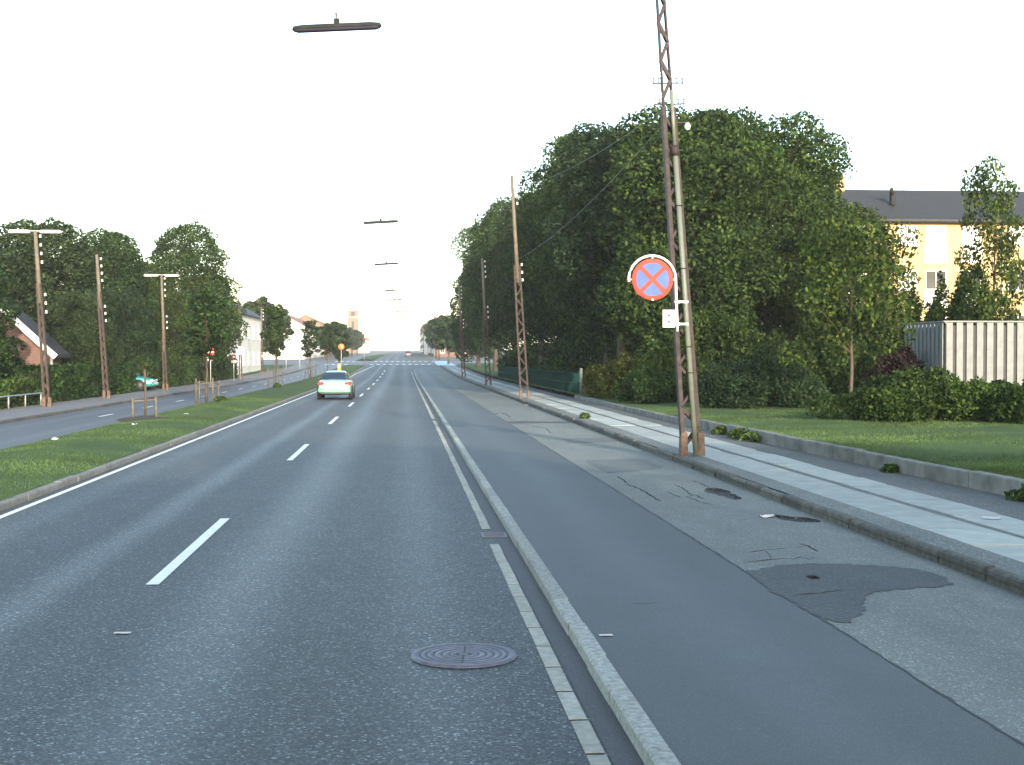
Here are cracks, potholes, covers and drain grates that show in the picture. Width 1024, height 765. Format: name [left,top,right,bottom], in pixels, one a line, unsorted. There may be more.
pothole [704,488,742,500]
crack [749,542,818,562]
manhole cover [411,643,517,668]
crack [607,472,713,505]
pothole [774,515,820,523]
